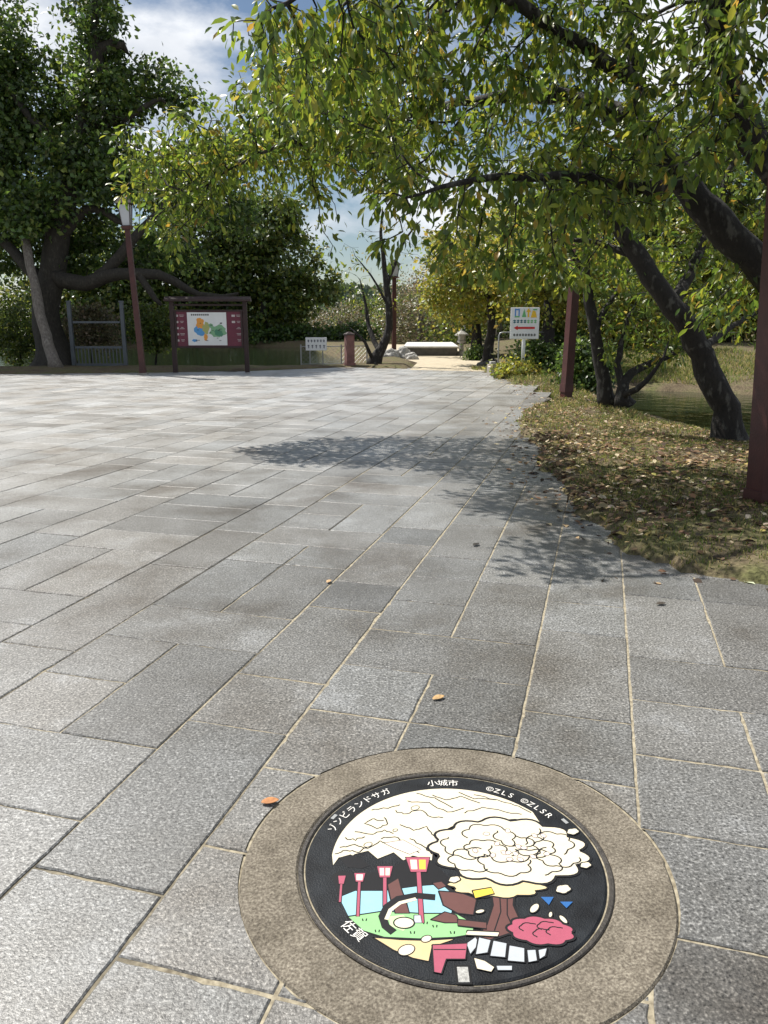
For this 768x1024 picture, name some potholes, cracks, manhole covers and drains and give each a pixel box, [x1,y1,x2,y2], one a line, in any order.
manhole cover [298,773,615,993]
